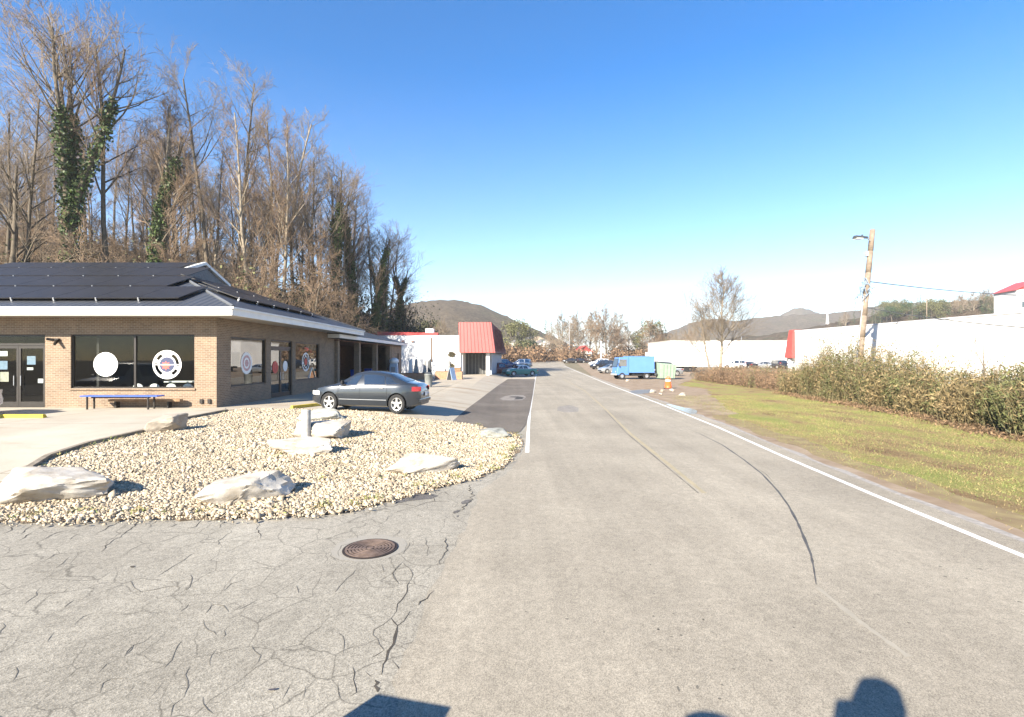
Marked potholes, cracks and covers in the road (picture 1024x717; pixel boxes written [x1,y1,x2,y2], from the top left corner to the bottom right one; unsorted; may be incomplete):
crack [152,643,212,716]
manhole cover [342,539,398,559]
crack [181,580,263,664]
crack [31,522,153,568]
crack [126,555,193,595]
crack [338,492,450,699]
